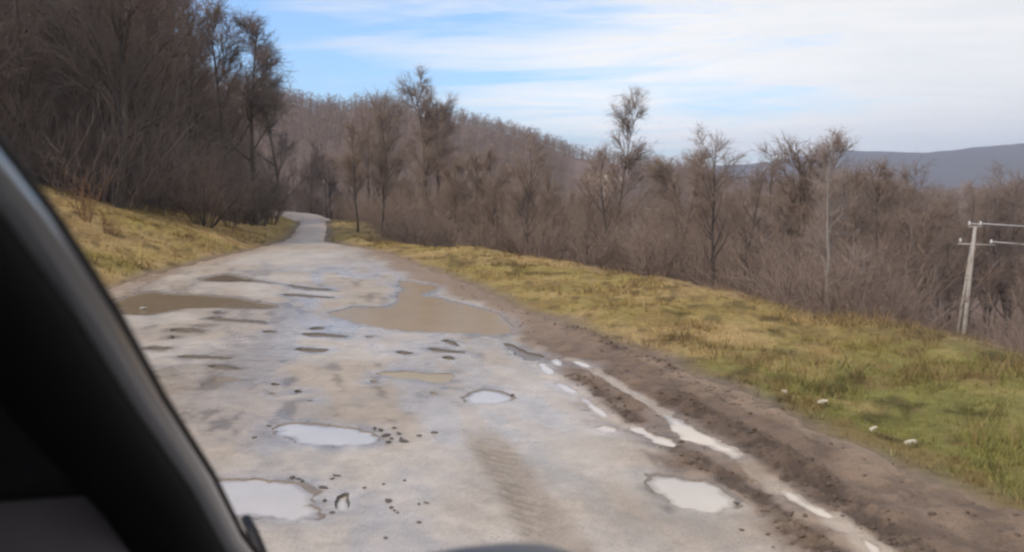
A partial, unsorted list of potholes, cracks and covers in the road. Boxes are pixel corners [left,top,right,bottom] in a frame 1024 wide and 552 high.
pothole [327,281,514,338]
pothole [219,477,326,521]
pothole [460,388,516,404]
pothole [198,274,282,284]
pothole [502,343,545,361]
pothole [376,371,456,383]
pothole [271,422,381,448]
pothole [335,493,350,510]
pothole [643,472,745,513]
pothole [115,291,280,315]
